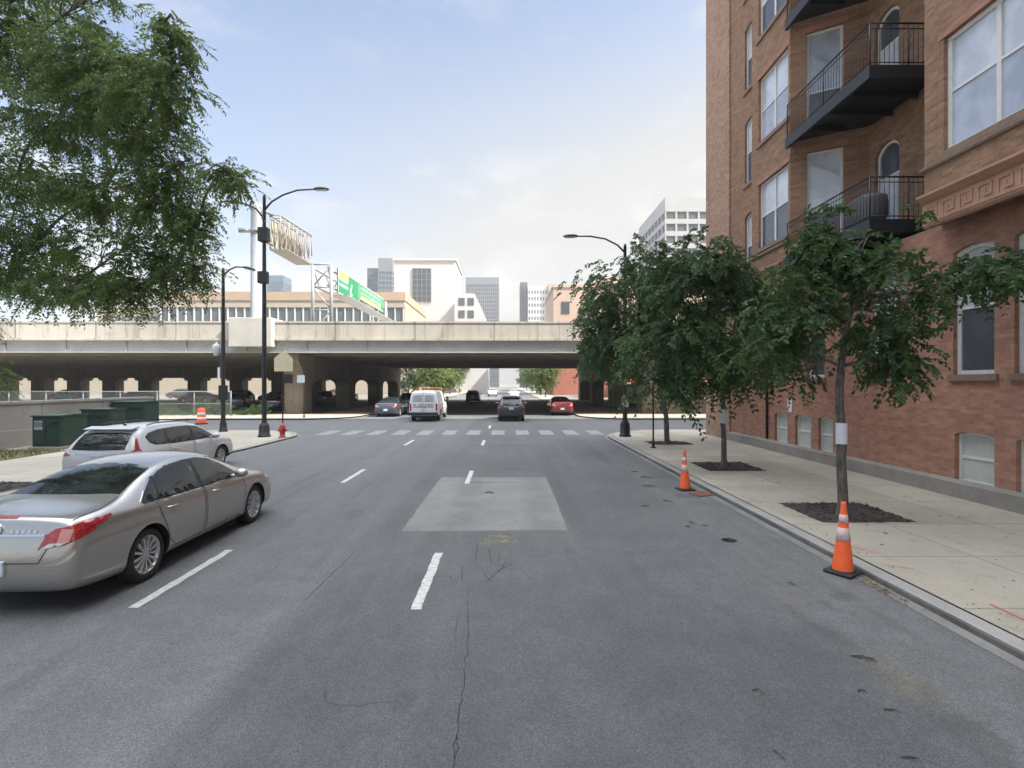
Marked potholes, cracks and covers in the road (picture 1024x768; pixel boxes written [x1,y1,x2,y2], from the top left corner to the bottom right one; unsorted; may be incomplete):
crack [437,543,511,768]
crack [324,690,398,707]
